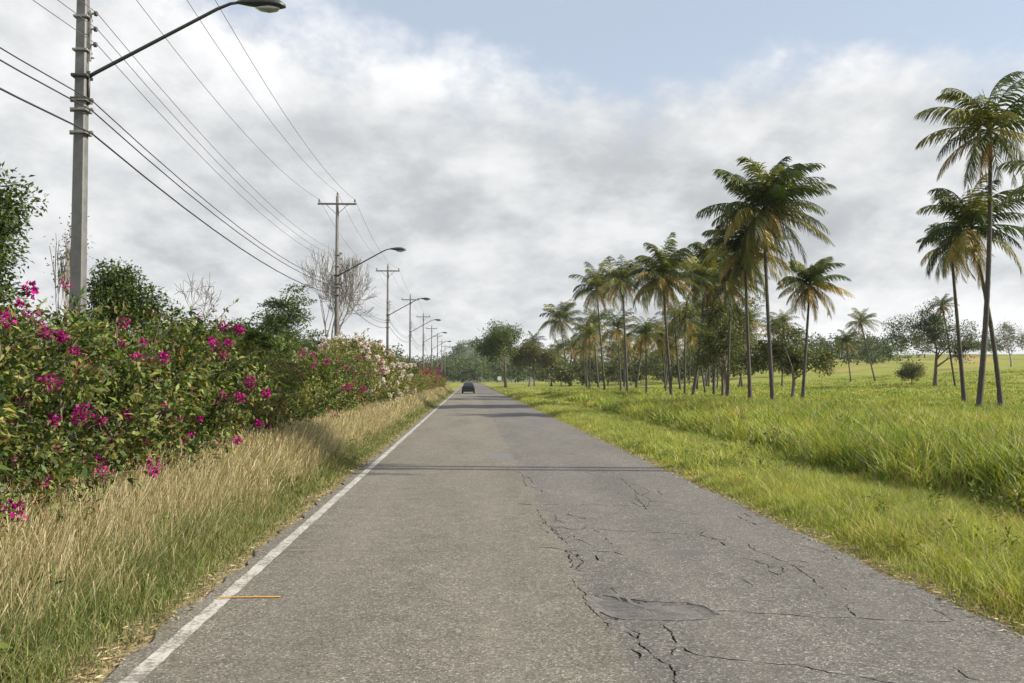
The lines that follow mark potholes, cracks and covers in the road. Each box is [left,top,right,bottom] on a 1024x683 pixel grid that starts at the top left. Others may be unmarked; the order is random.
crack [517,470,893,683]
crack [722,543,997,641]
pothole [586,595,720,621]
